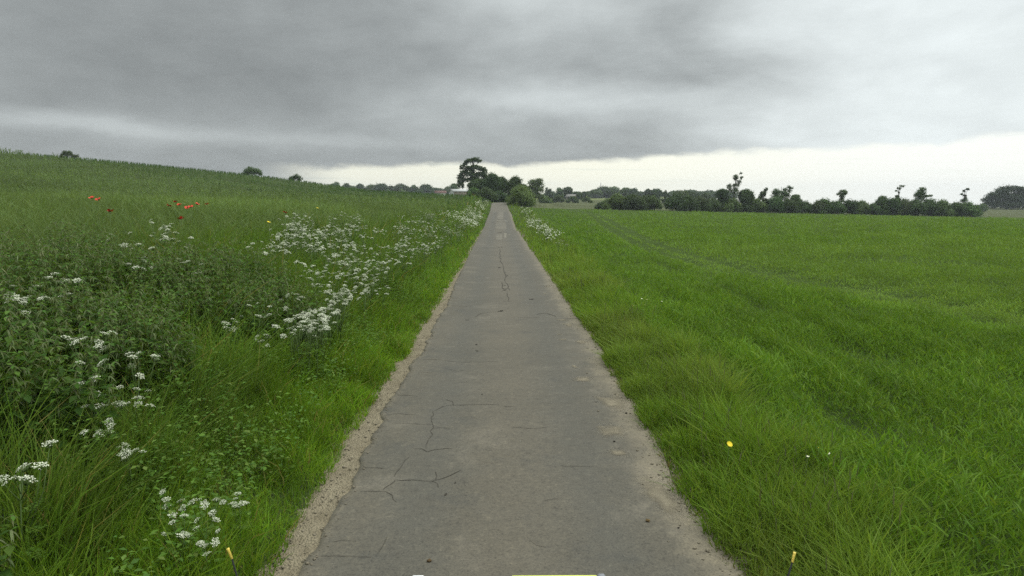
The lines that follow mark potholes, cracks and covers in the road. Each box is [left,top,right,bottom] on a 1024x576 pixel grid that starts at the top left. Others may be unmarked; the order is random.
crack [364,394,476,500]
